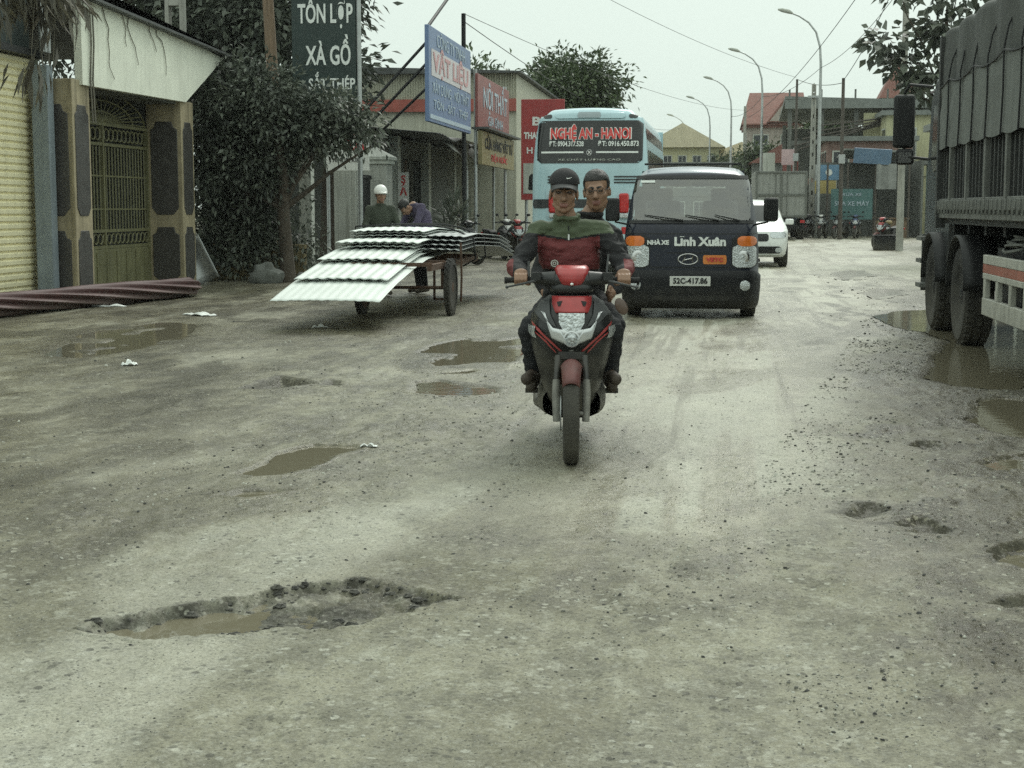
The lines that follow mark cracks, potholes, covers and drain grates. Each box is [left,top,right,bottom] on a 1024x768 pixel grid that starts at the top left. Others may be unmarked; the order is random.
pothole [400,379,508,397]
pothole [396,336,524,375]
pothole [65,575,467,646]
pothole [834,501,938,534]
pothole [224,442,371,478]
pothole [848,506,1016,552]
